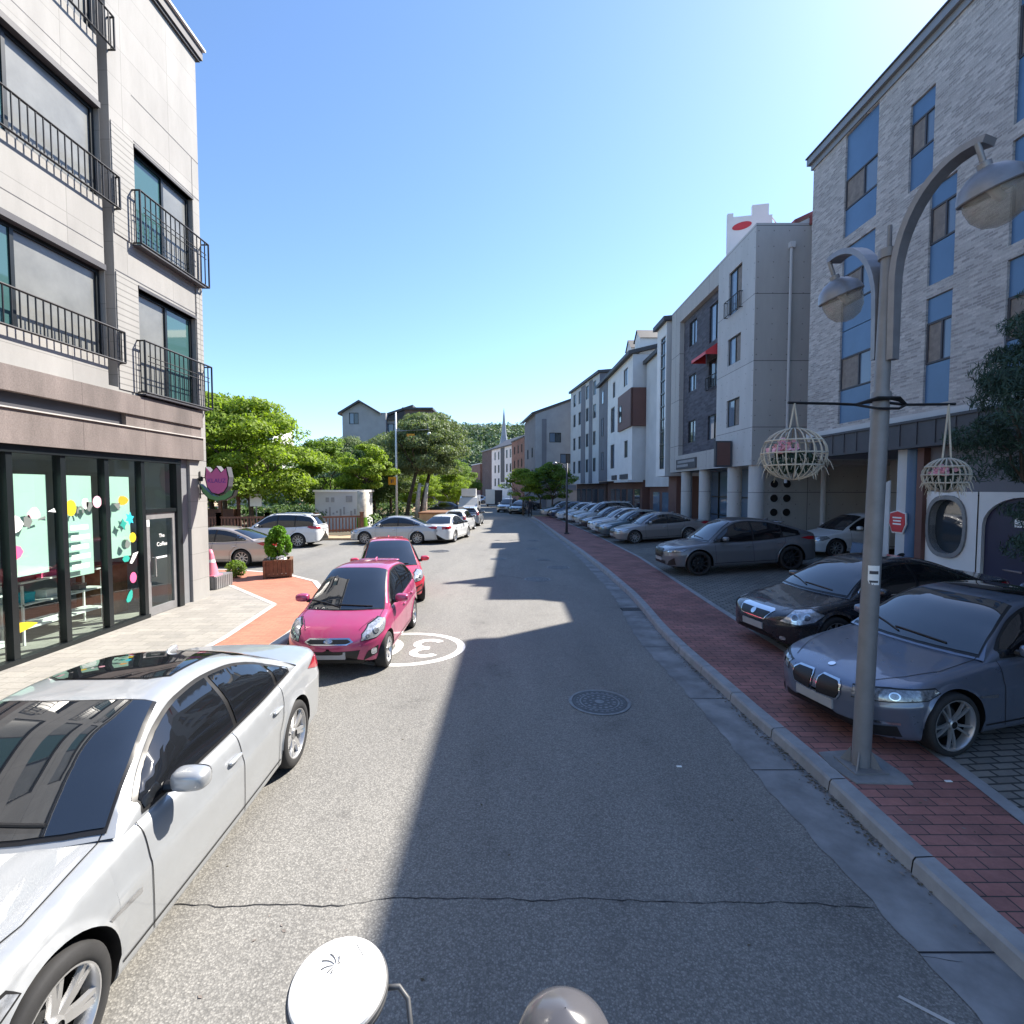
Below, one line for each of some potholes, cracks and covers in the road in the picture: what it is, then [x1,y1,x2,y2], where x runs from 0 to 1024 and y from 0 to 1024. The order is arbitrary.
manhole cover [569,690,631,716]
crack [174,897,875,908]
